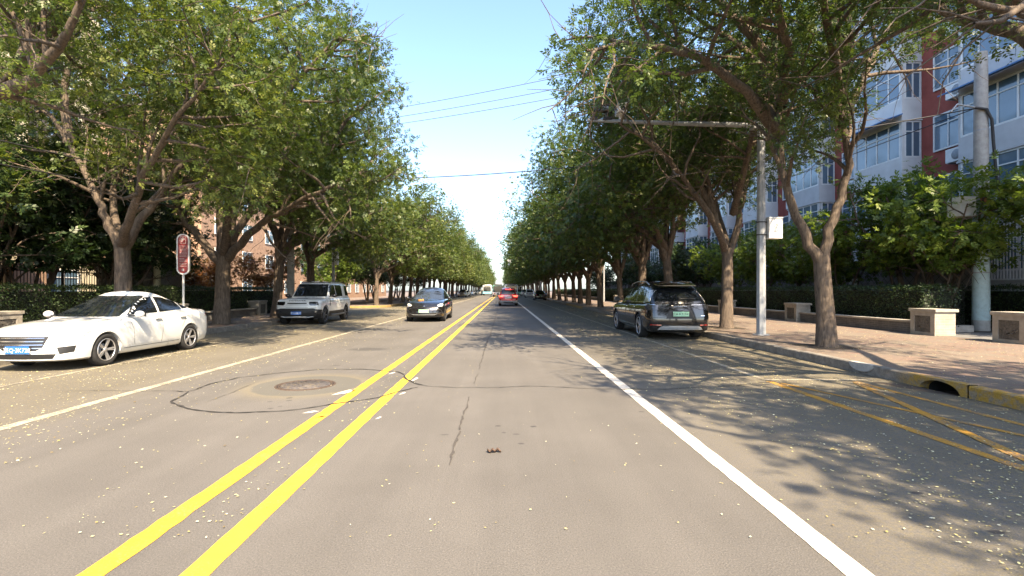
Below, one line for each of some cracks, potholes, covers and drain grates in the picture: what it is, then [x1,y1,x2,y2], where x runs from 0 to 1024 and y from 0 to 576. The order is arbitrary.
manhole cover [274,379,336,391]
crack [344,302,545,465]
